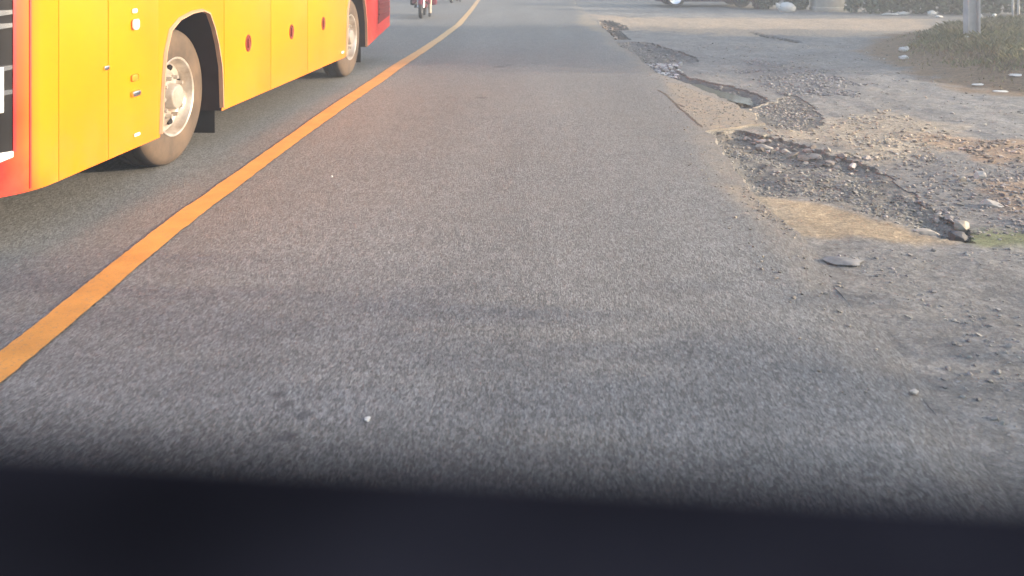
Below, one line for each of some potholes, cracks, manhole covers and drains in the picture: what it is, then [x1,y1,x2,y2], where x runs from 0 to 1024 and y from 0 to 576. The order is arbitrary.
pothole [599,21,628,40]
pothole [619,43,767,109]
pothole [747,96,823,131]
crack [658,90,703,127]
pothole [715,133,970,243]
